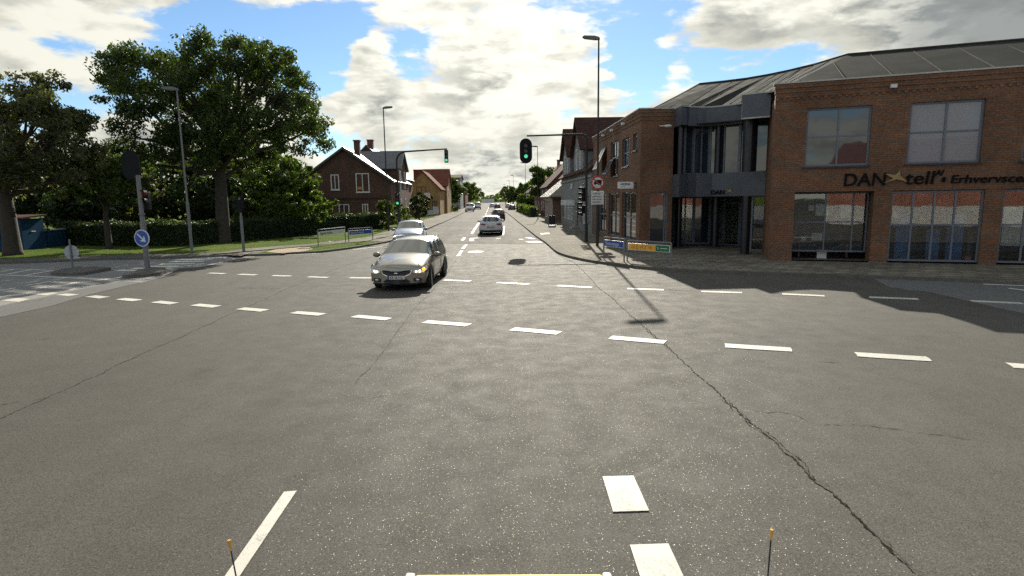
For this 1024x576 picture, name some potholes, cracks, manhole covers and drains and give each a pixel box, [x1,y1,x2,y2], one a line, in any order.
crack [569,260,973,576]
